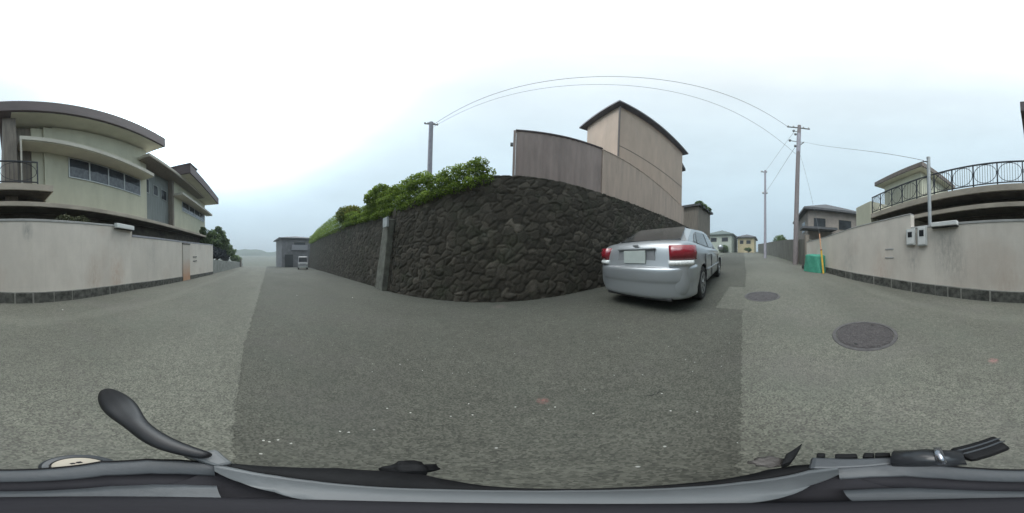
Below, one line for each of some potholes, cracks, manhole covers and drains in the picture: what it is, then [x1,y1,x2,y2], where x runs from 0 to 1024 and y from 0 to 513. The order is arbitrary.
manhole cover [832,322,898,351]
manhole cover [744,291,780,302]
